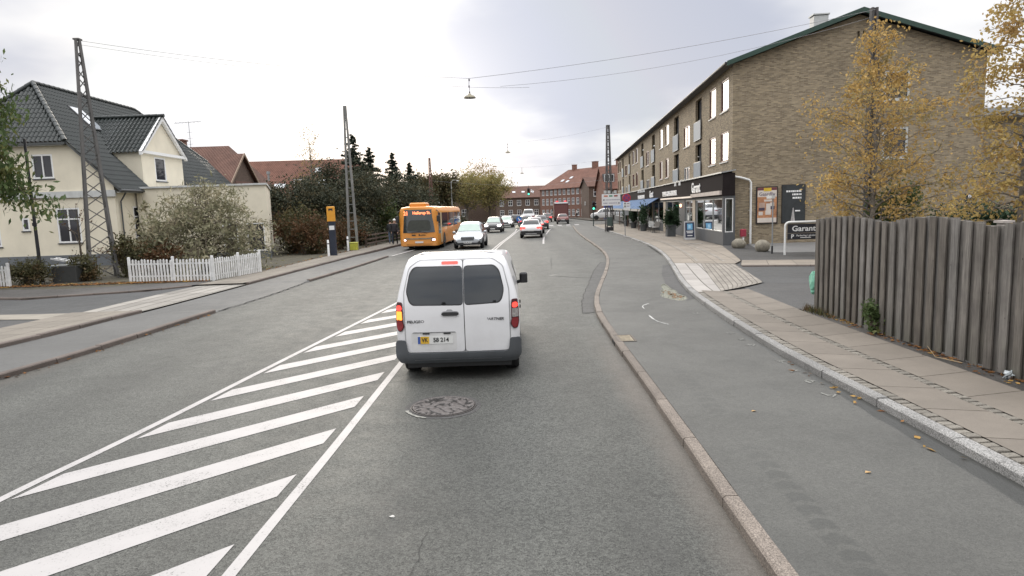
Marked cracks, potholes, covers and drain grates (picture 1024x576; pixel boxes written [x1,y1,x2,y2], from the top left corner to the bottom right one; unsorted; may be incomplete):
manhole cover [405,395,481,419]
